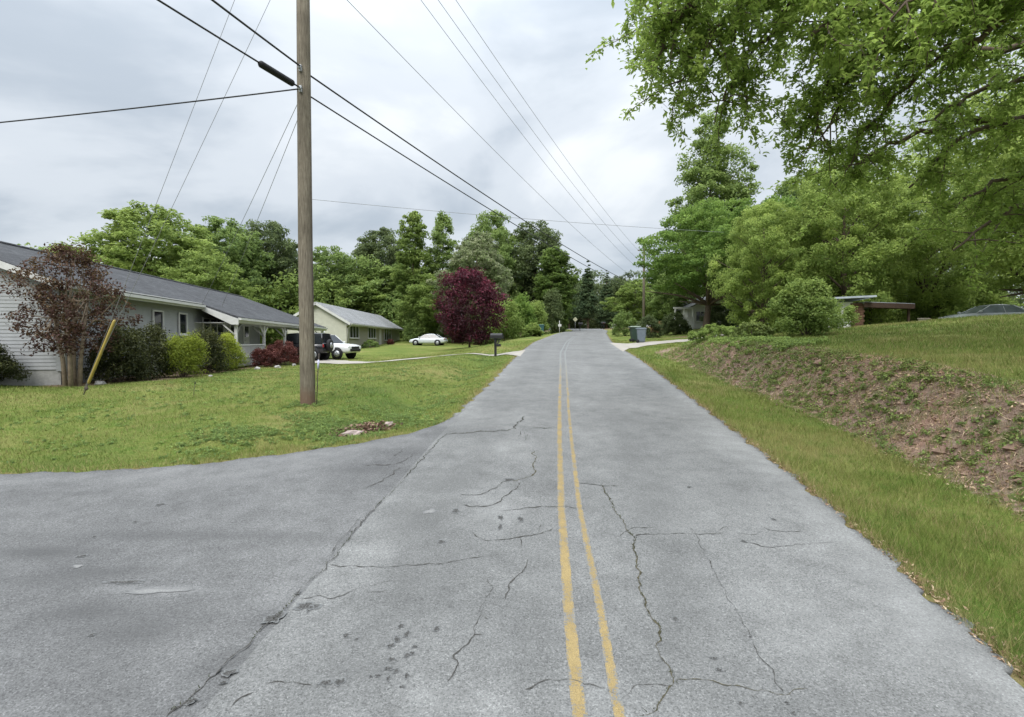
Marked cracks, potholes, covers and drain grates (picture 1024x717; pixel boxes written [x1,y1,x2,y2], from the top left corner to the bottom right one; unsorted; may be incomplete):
crack [300,518,552,683]
crack [452,417,573,511]
crack [527,481,826,716]
